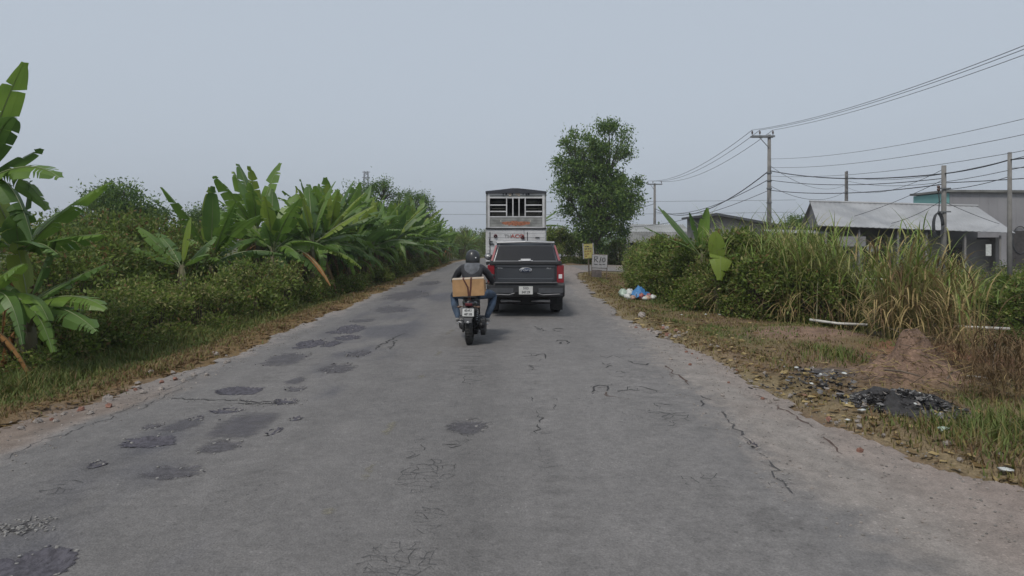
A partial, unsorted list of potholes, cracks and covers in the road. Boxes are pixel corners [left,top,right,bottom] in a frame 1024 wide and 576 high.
crack [591,355,813,498]
crack [530,389,556,468]
crack [357,418,493,576]
